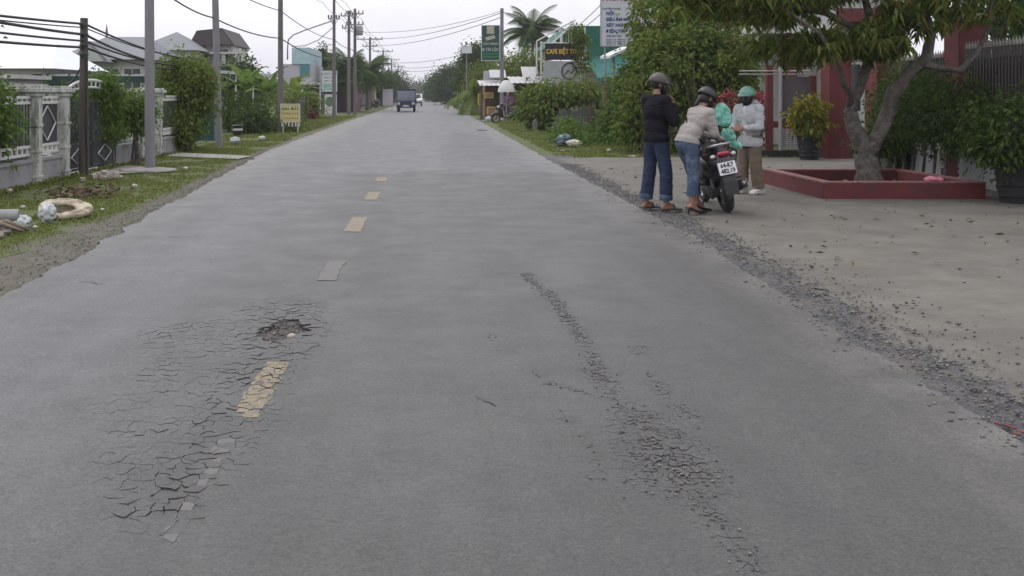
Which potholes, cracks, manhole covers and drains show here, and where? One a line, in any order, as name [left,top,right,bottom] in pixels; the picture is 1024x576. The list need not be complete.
crack [68,292,339,535]
crack [488,272,771,576]
pothole [260,321,308,343]
